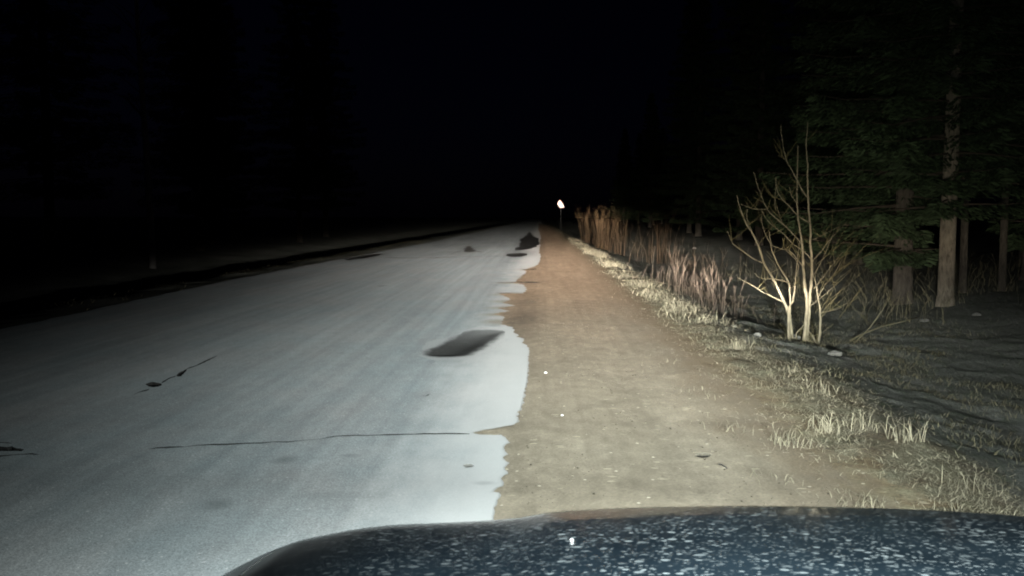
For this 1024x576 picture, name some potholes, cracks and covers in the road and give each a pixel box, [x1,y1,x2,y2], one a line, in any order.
crack [151,433,468,449]
pothole [515,231,540,250]
pothole [419,326,506,361]
